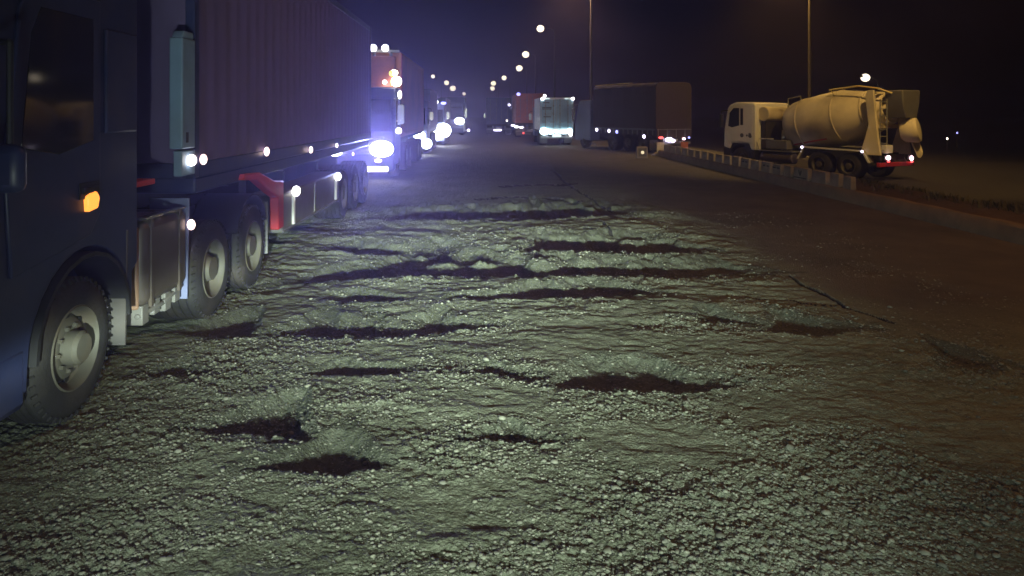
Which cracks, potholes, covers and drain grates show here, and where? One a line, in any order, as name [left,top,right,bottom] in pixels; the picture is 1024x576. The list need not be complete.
pothole [335,194,658,224]
pothole [917,333,1024,375]
pothole [524,349,778,396]
pothole [491,225,746,262]
pothole [240,250,807,291]
crack [474,183,614,237]
pothole [150,303,278,341]
pothole [746,304,890,337]
pothole [443,416,580,446]
pothole [217,417,428,481]
pothole [233,301,519,342]
pothole [165,381,351,463]
